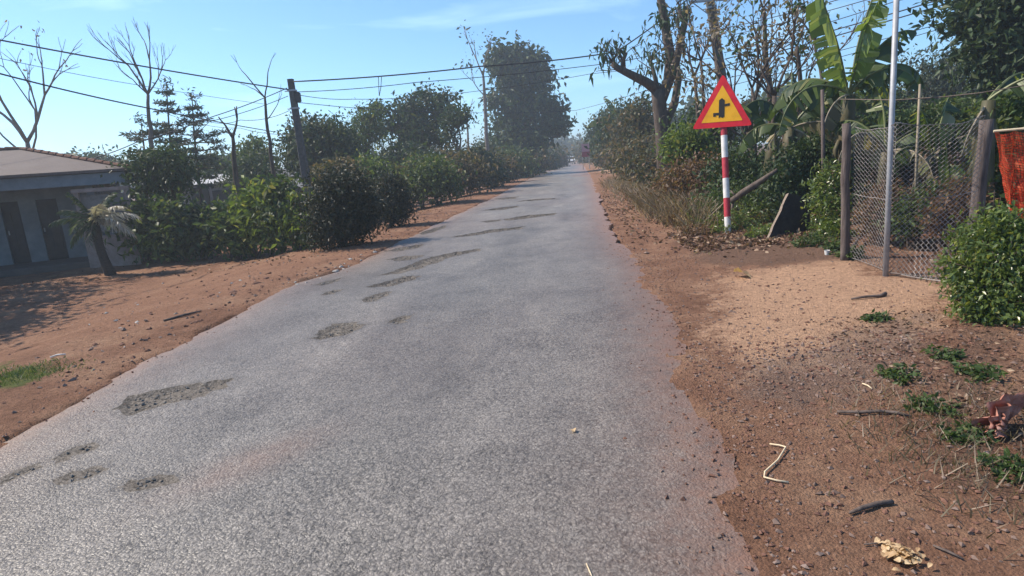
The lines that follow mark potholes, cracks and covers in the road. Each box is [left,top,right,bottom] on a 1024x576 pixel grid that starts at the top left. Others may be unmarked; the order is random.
pothole [112,378,234,416]
pothole [388,315,412,324]
pothole [53,465,110,485]
pothole [49,442,100,464]
pothole [454,226,525,237]
pothole [310,322,366,340]
pothole [0,462,44,485]
pothole [362,292,391,302]
pothole [116,474,184,492]
pothole [367,276,421,287]
pothole [377,249,481,276]
